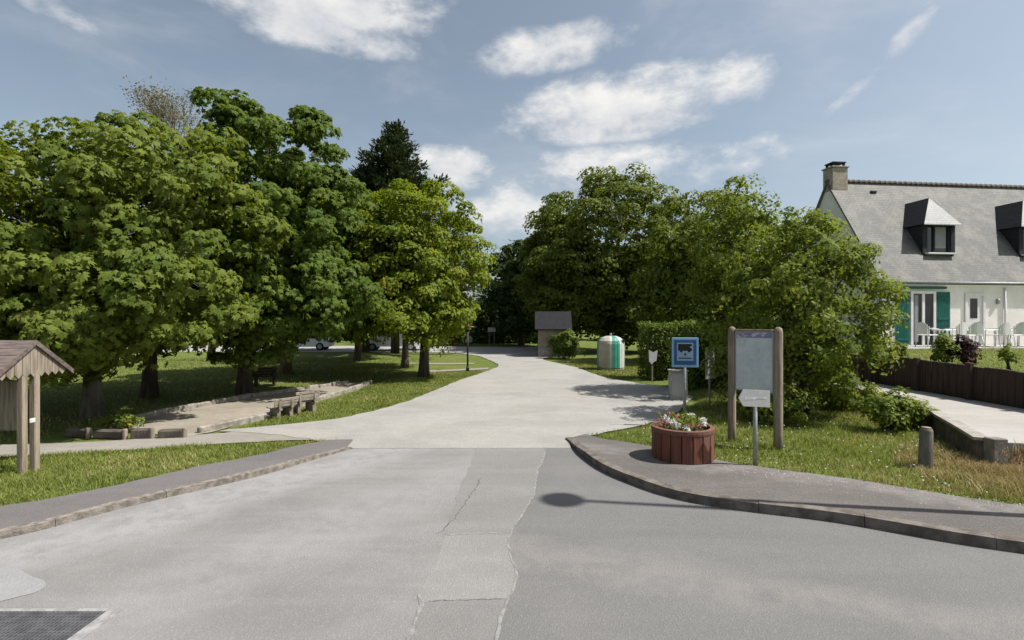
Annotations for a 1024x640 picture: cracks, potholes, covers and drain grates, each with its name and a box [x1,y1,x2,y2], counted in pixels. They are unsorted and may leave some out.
drain grate [0,608,123,640]
